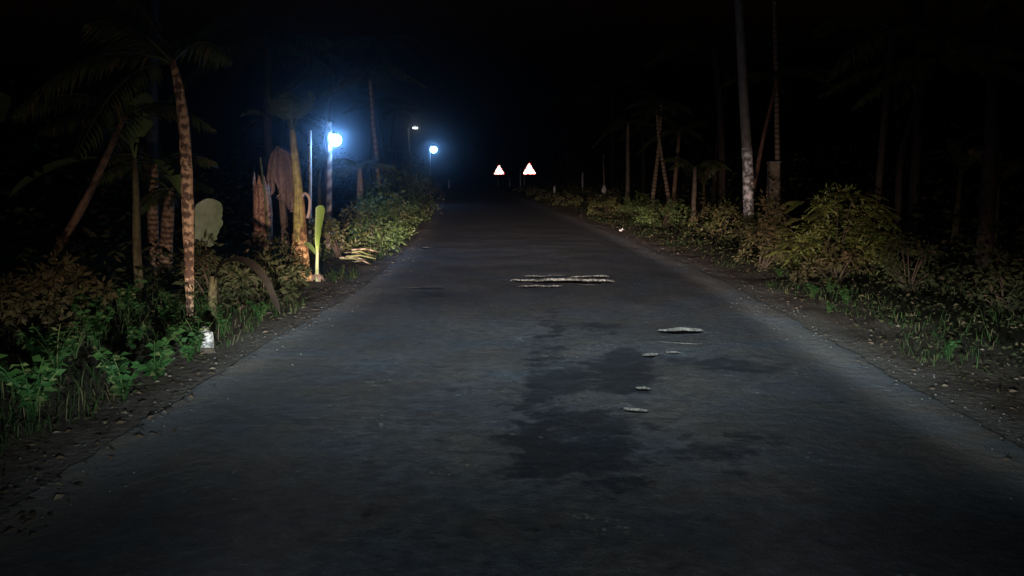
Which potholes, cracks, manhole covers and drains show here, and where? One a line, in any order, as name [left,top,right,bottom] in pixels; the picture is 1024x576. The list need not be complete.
pothole [502,273,620,289]
